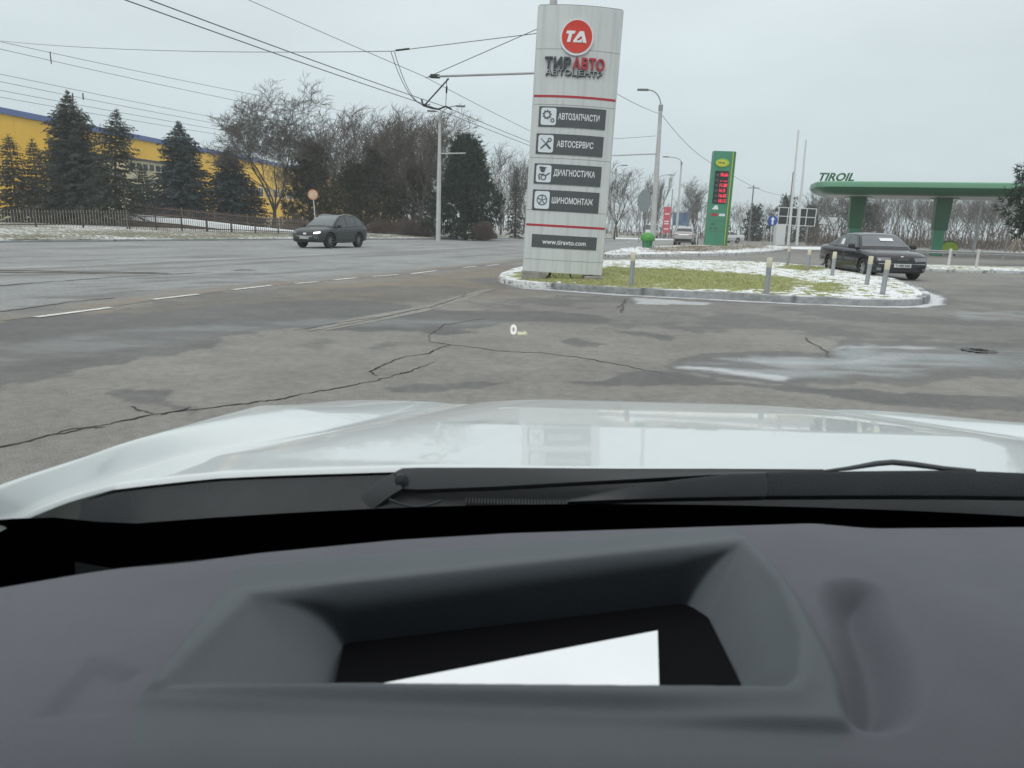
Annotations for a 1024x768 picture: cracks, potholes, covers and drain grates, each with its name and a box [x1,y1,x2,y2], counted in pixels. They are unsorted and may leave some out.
crack [0,319,663,447]
